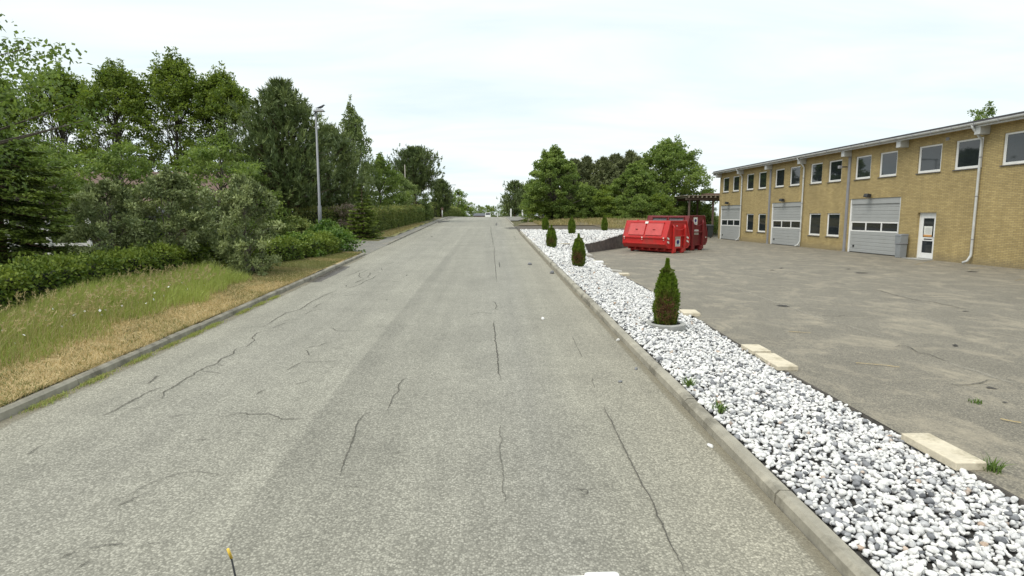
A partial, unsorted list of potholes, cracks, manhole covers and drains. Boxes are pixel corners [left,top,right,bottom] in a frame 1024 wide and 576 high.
crack [605,410,686,576]
crack [99,263,390,417]
crack [478,301,501,377]
crack [340,417,362,474]
